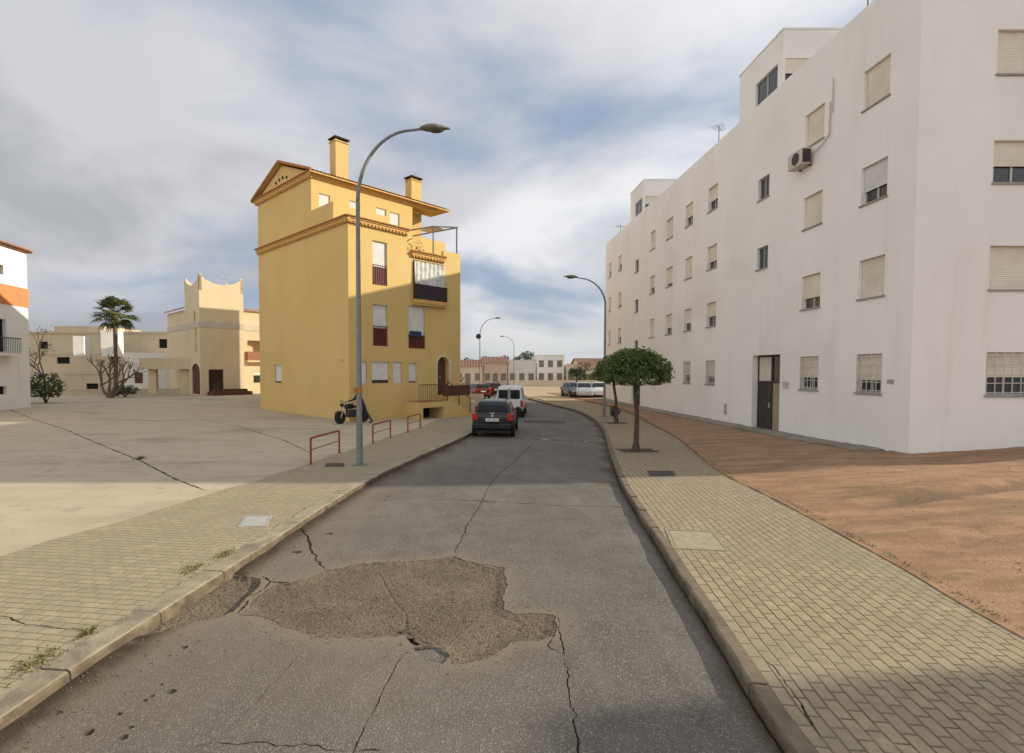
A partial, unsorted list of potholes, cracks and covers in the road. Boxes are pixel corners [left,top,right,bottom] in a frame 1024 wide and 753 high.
pothole [244,557,560,664]
crack [455,439,593,569]
crack [547,632,580,753]
crack [353,660,400,753]
utility cover [665,529,730,551]
crack [301,529,321,566]
utility cover [237,515,272,527]
